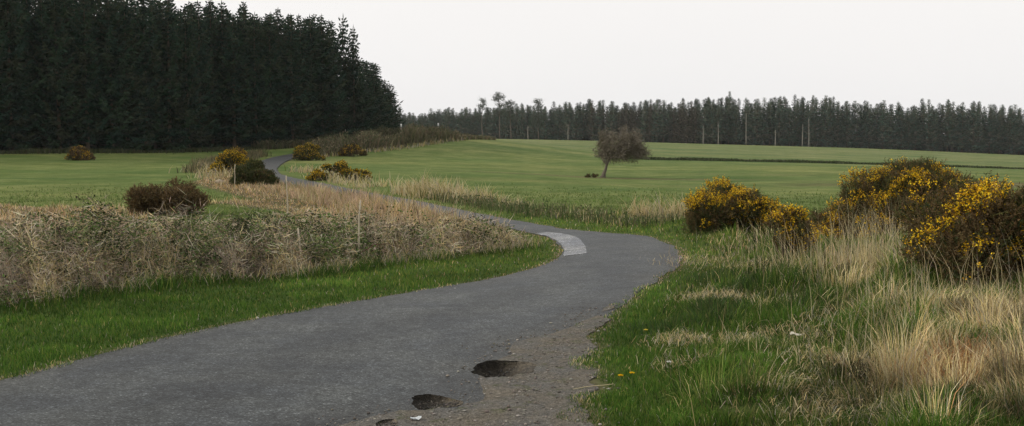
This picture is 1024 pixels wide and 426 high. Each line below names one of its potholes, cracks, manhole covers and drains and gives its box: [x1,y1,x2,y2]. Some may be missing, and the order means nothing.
pothole [471,360,537,378]
pothole [412,394,464,410]
